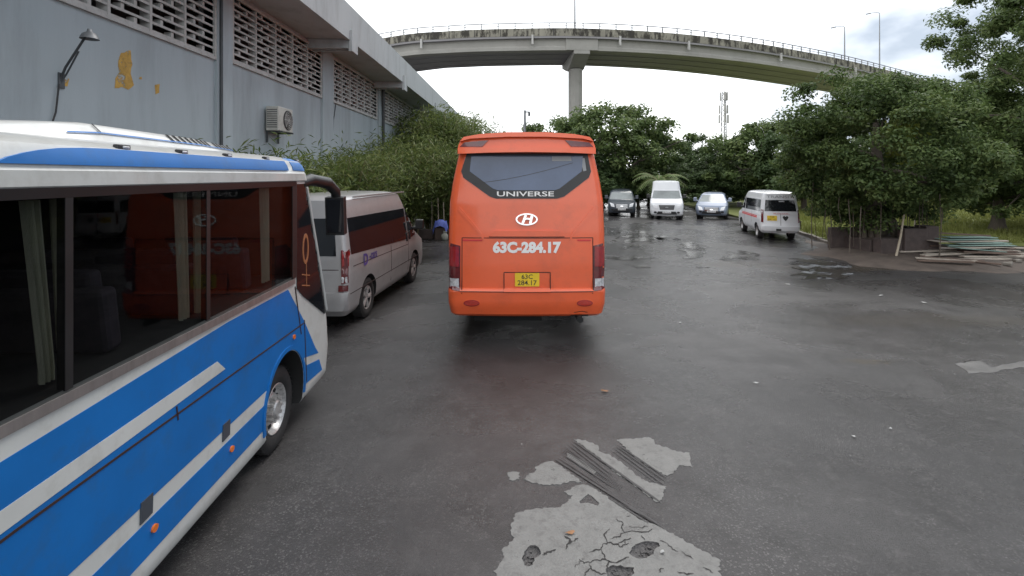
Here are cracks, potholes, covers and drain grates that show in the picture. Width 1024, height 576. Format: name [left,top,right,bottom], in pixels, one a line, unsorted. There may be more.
pothole [629,541,660,559]
pothole [606,565,634,576]
crack [542,520,713,575]
pothole [522,545,541,566]
